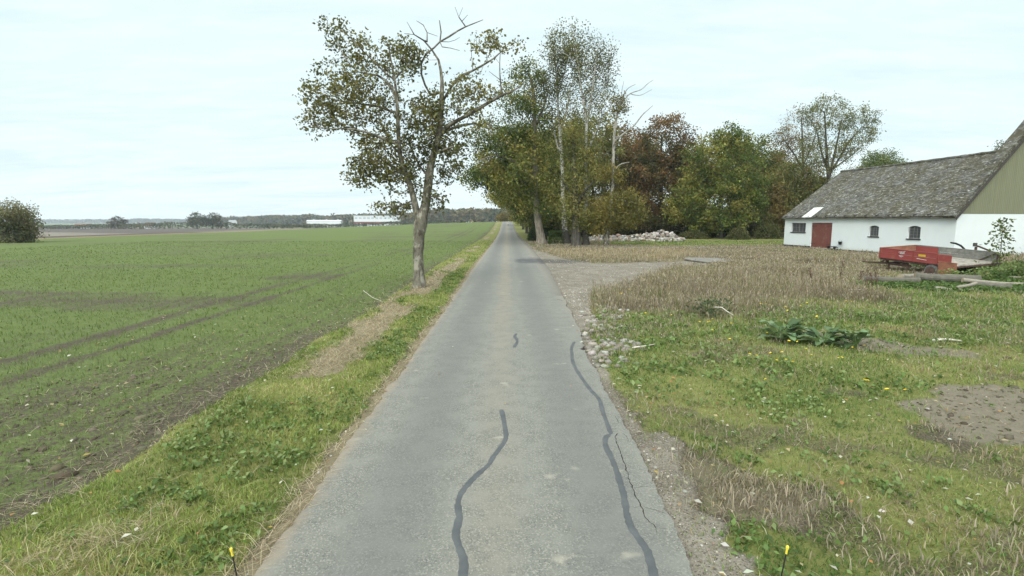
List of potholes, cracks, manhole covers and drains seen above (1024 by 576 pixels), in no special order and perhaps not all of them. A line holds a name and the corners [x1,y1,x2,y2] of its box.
crack [615,416,665,529]
